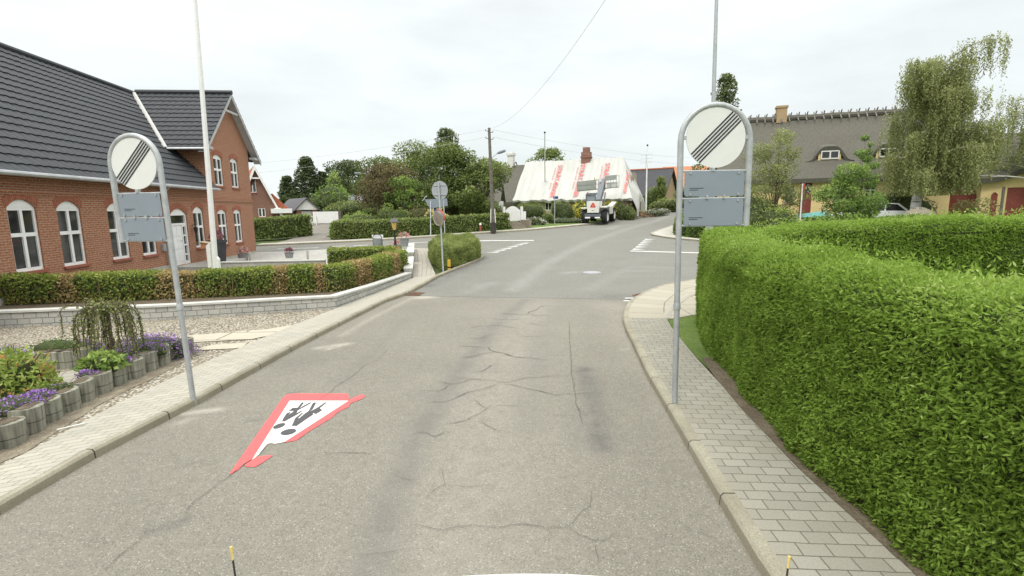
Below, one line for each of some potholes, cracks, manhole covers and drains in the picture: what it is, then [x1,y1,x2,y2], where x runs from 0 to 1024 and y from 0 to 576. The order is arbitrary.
crack [415,492,618,566]
crack [417,306,593,436]
